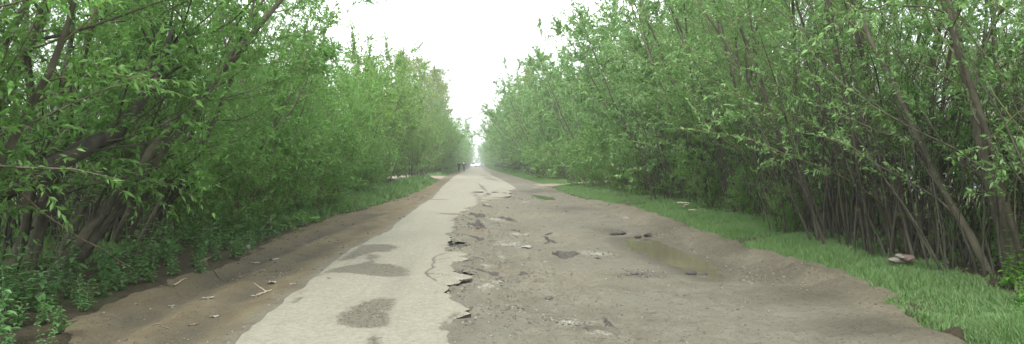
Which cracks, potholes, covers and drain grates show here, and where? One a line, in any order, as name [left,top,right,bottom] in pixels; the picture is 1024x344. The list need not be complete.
pothole [537,249,595,261]
crack [408,252,549,288]
